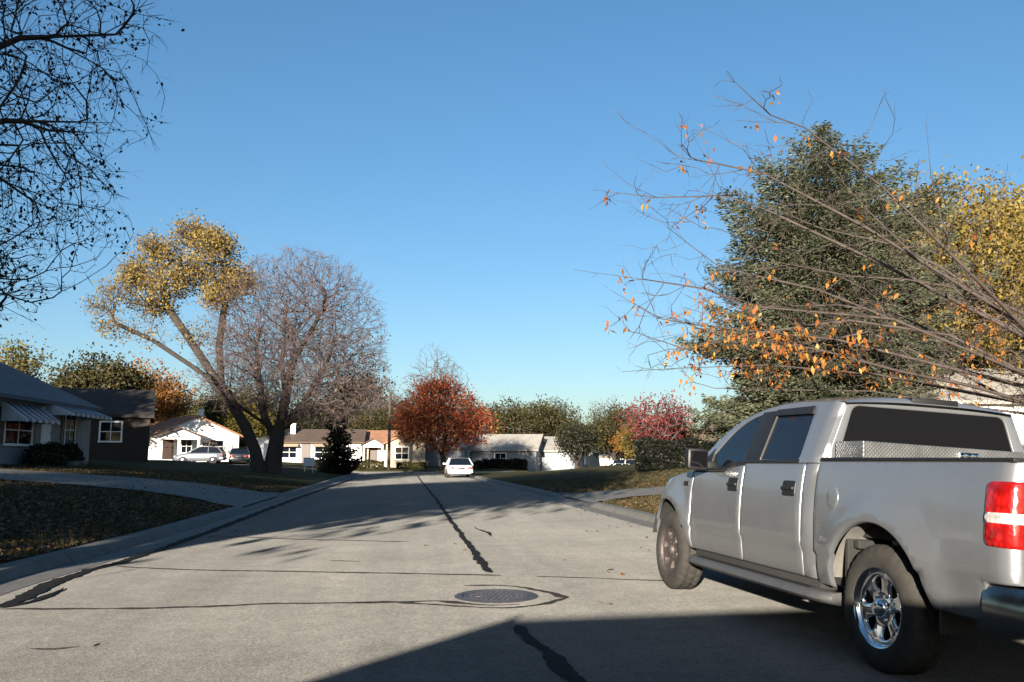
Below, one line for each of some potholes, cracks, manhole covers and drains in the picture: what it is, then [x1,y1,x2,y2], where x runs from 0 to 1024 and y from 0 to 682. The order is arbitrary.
manhole cover [454,589,538,603]
